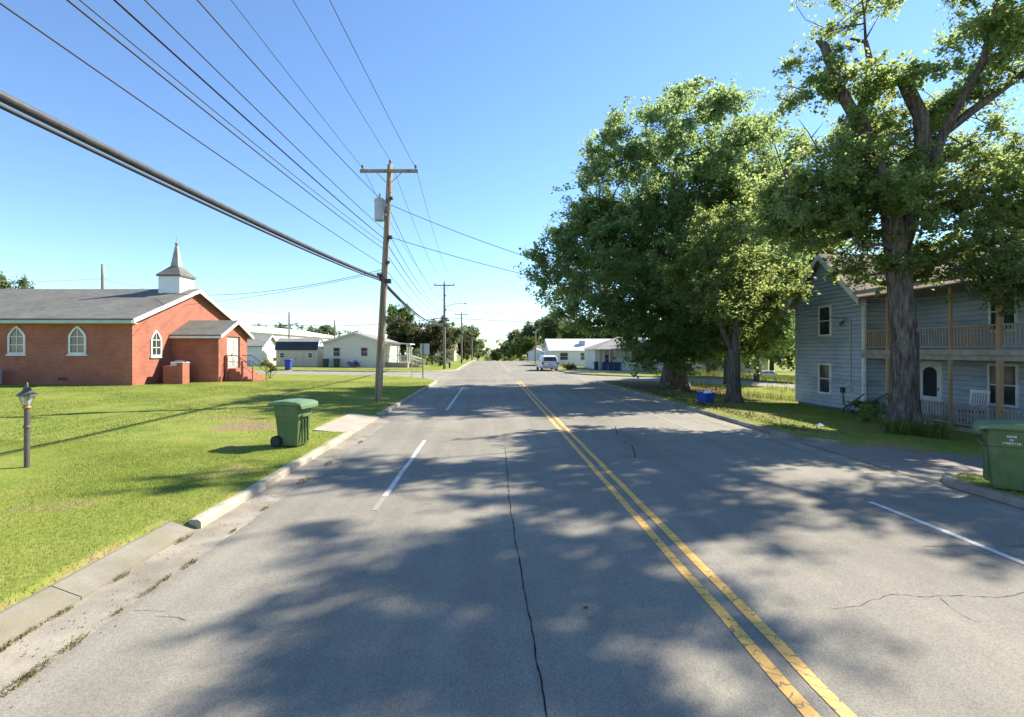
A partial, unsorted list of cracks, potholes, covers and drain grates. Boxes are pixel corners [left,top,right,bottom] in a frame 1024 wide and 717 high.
crack [505,451,548,717]
crack [834,592,1024,622]
